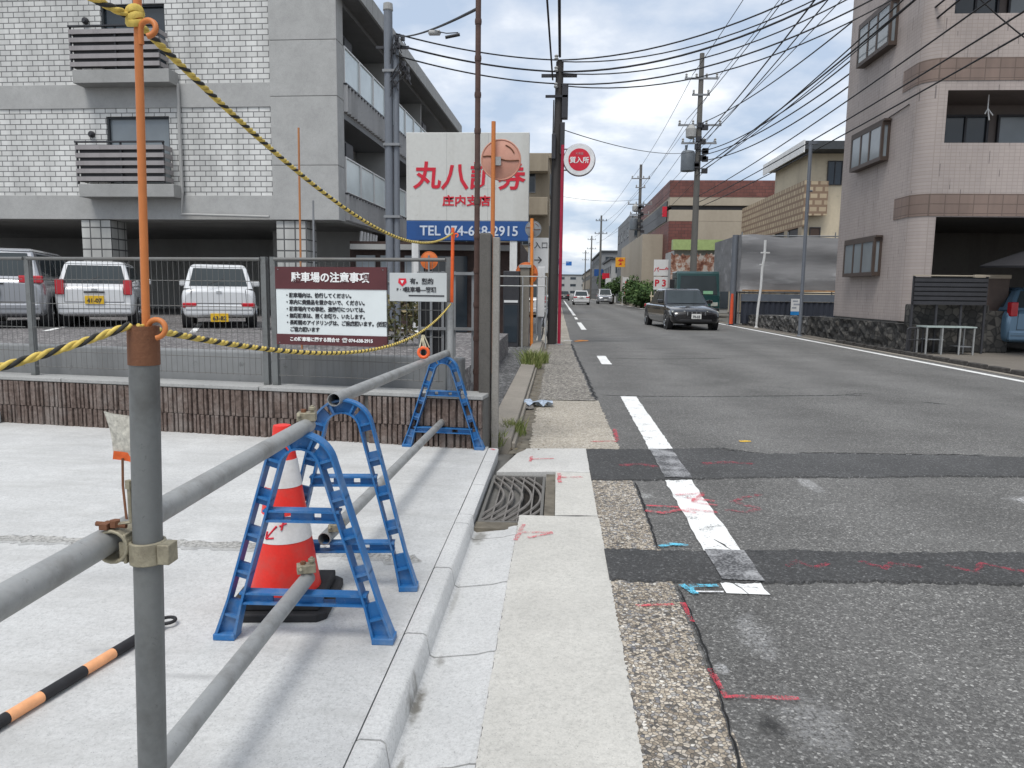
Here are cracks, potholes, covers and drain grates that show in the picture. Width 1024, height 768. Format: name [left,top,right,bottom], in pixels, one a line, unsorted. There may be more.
drain grate [477,475,546,523]
